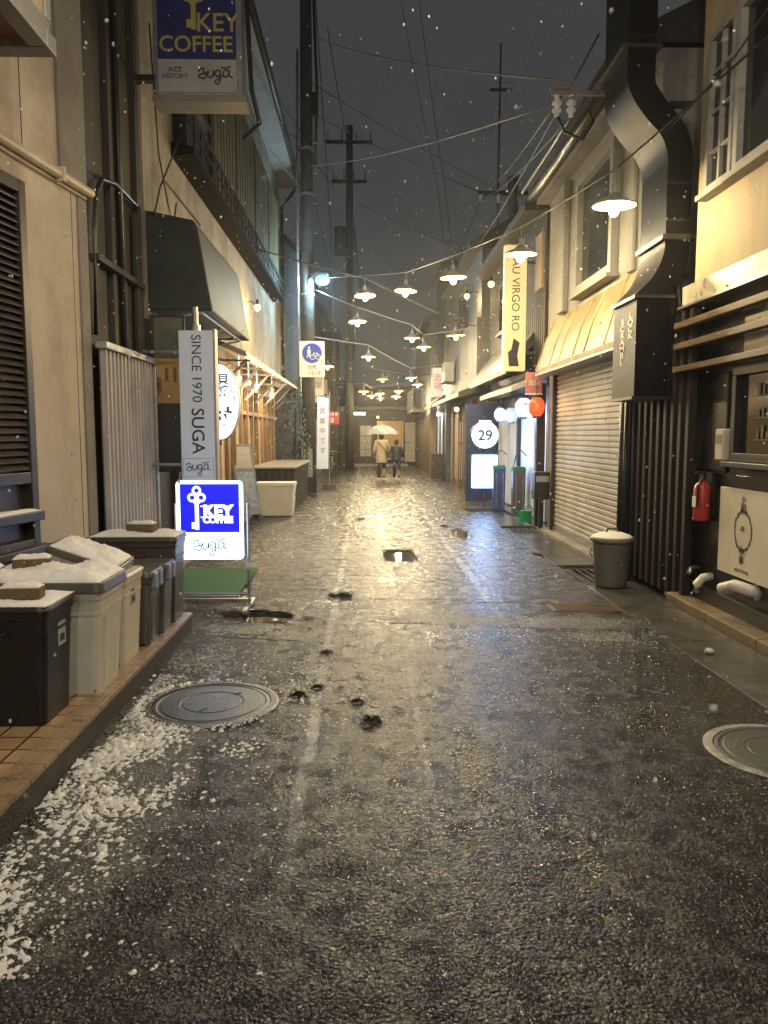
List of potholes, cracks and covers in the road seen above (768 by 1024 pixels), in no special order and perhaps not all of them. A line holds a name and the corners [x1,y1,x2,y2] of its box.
manhole cover [143,682,279,728]
manhole cover [703,724,768,777]
pothole [199,609,308,626]
pothole [448,526,472,543]
pothole [379,549,420,565]
